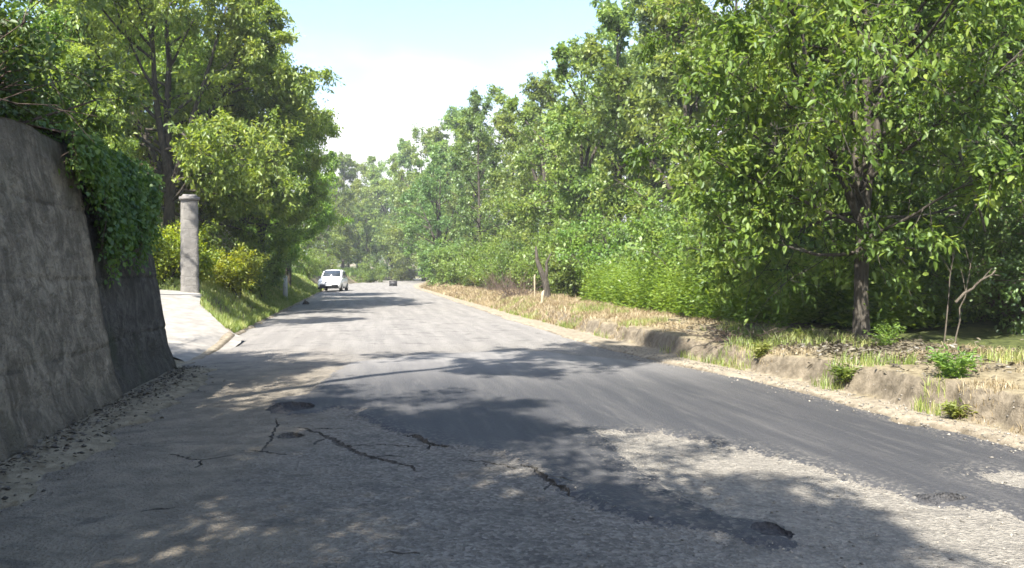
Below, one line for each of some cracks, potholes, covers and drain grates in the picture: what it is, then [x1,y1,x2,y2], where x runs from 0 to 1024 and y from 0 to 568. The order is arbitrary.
crack [170,417,575,498]
pothole [265,401,315,414]
pothole [914,492,967,505]
pothole [750,521,795,539]
